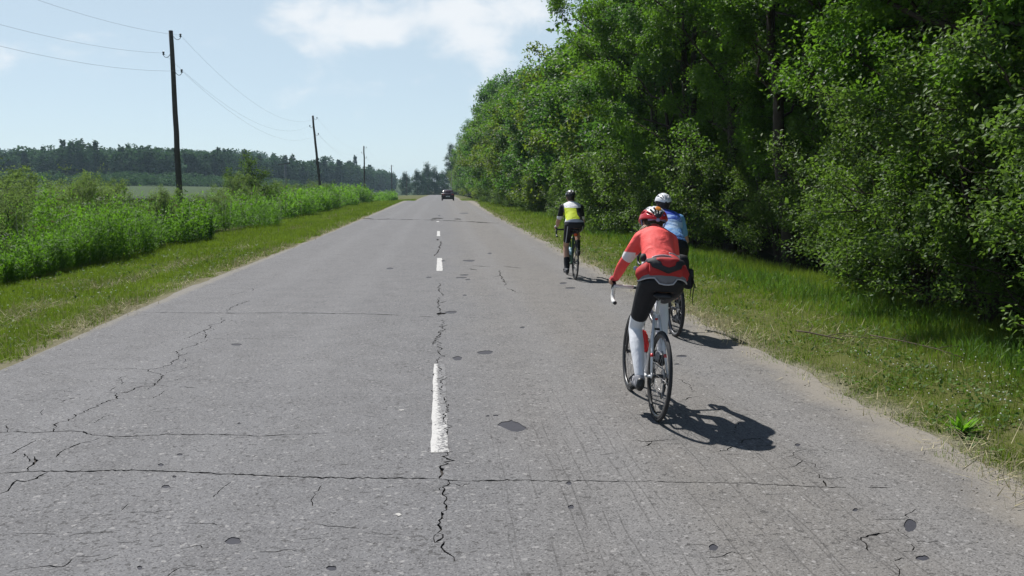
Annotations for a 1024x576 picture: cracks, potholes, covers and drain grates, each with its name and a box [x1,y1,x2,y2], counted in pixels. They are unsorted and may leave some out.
crack [0,283,890,561]
crack [856,510,936,576]
